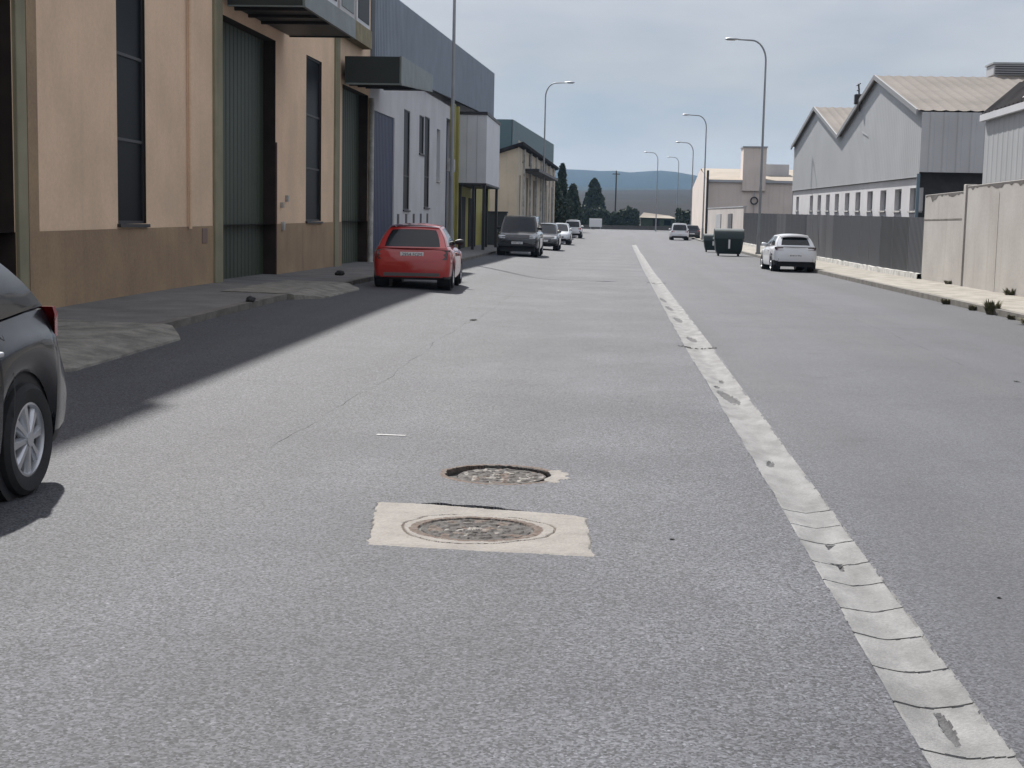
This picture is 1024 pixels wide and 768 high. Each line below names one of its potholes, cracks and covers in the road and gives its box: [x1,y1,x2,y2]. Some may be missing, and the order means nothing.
manhole cover [440,464,571,485]
manhole cover [409,516,543,542]
